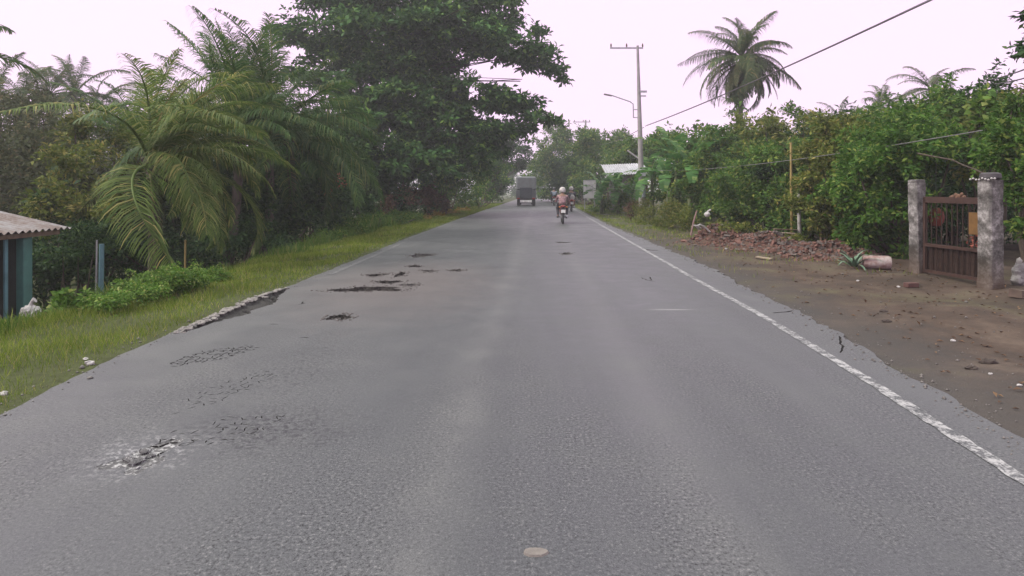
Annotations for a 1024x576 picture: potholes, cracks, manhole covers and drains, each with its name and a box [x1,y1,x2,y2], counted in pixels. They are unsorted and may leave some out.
pothole [169,287,290,334]
pothole [93,438,184,475]
pothole [320,312,359,321]
